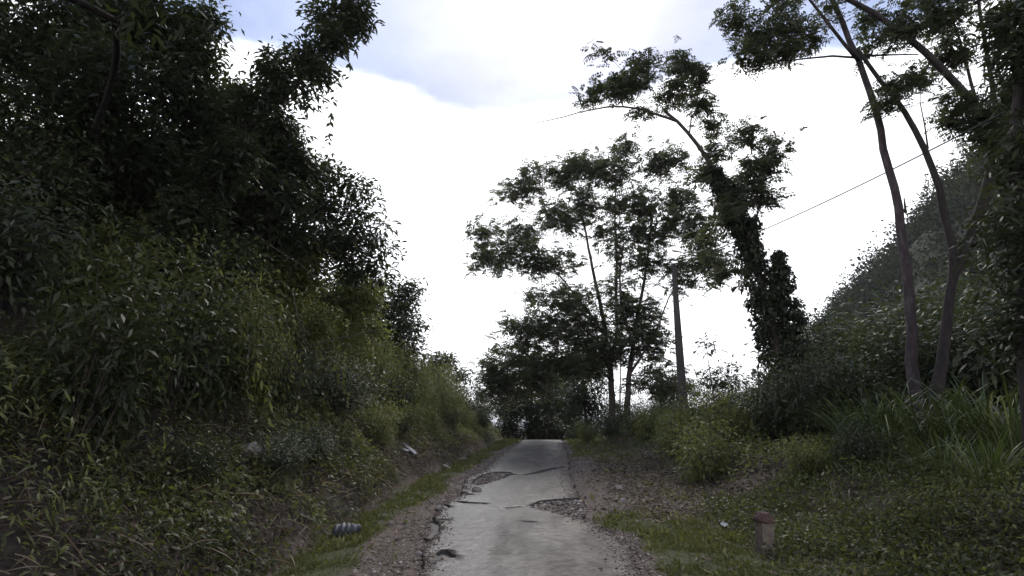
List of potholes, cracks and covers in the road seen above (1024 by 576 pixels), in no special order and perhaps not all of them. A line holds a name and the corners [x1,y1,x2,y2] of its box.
pothole [530,498,587,520]
crack [507,467,564,476]
pothole [436,550,456,559]
